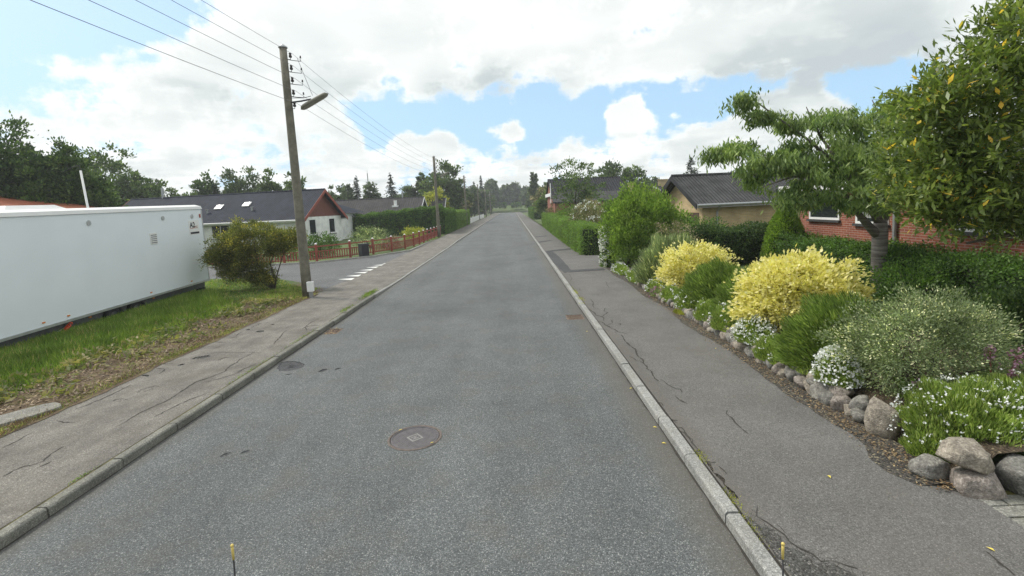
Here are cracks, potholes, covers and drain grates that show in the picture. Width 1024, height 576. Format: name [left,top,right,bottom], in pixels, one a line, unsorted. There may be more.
crack [120,322,284,425]
crack [745,506,867,576]
crack [986,551,1013,574]
manhole cover [387,425,442,451]
